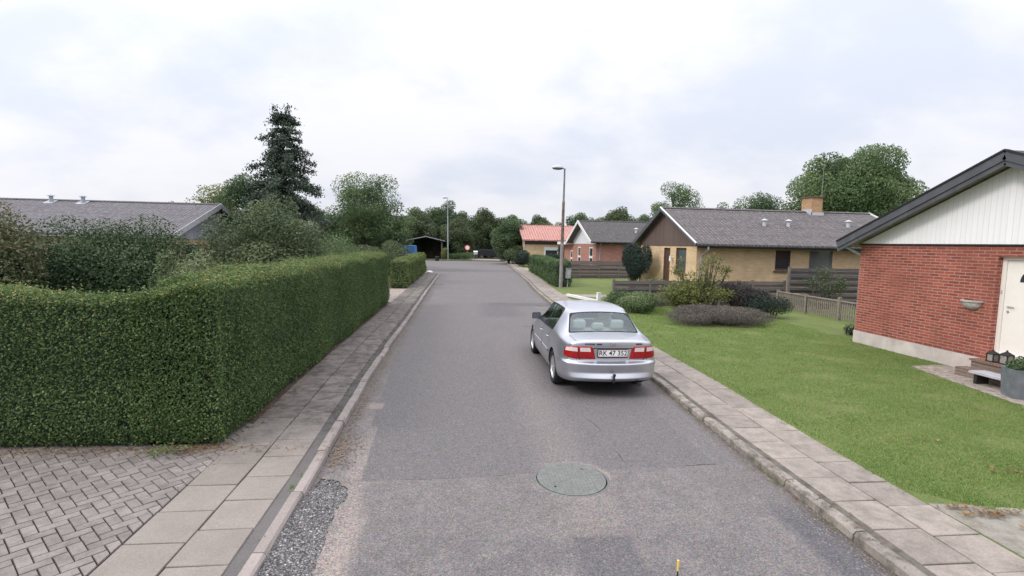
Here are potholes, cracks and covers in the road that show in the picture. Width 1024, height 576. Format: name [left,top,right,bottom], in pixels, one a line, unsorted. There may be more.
manhole cover [535,463,609,497]
